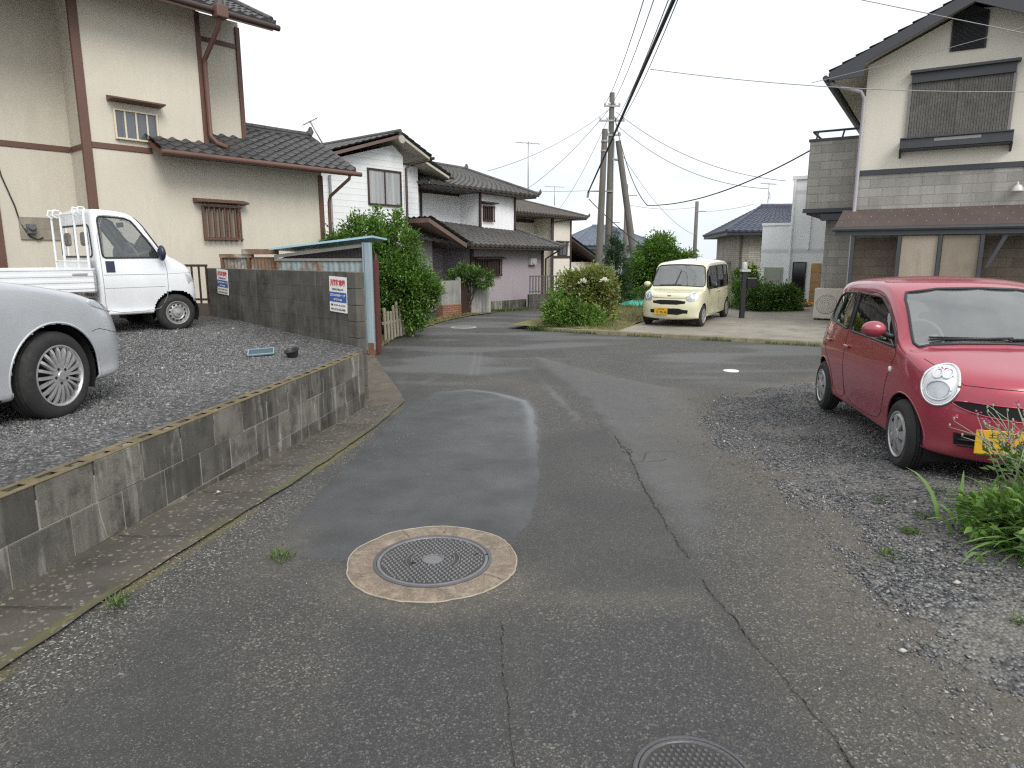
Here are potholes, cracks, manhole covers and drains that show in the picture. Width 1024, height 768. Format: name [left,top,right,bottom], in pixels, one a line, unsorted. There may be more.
crack [702,579,854,768]
manhole cover [633,735,749,768]
crack [609,417,690,559]
manhole cover [346,526,518,603]
crack [499,621,517,768]
